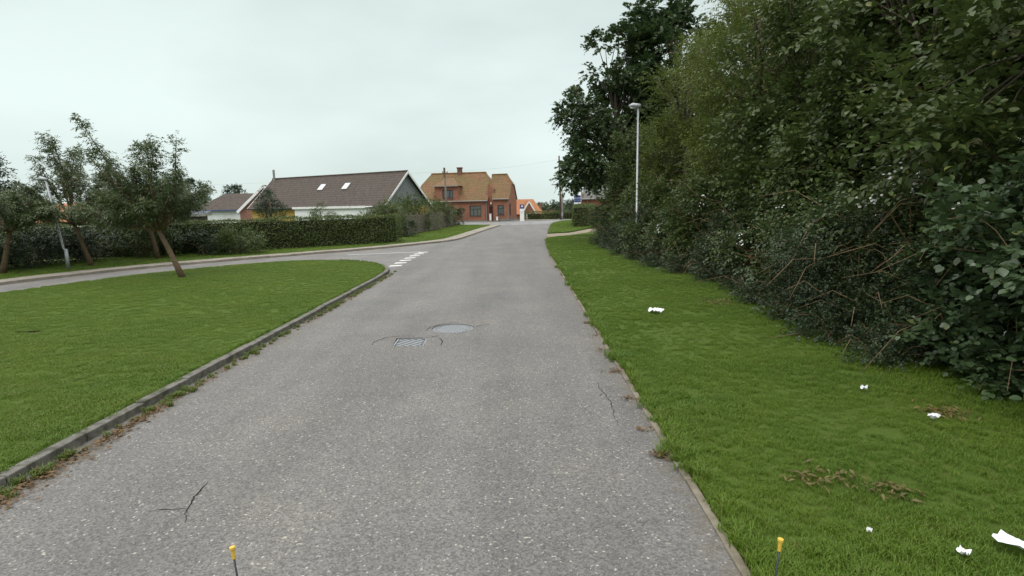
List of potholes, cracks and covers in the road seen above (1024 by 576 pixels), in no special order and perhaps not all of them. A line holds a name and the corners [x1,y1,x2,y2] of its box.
manhole cover [432,324,473,333]
crack [149,482,208,522]
